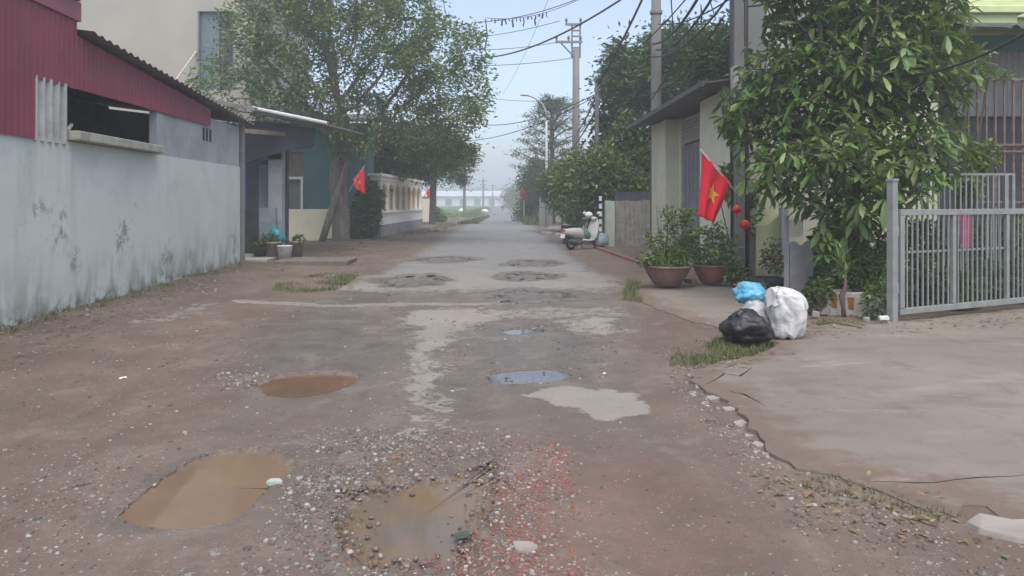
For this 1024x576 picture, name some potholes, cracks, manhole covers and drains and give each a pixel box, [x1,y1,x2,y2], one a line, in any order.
pothole [378,274,446,286]
pothole [119,445,298,530]
crack [874,475,1021,483]
pothole [329,461,506,571]
crack [709,358,766,407]
pothole [481,367,572,384]
pothole [485,289,576,304]
pothole [501,272,558,281]
pothole [502,327,547,335]
pothole [256,370,362,398]
